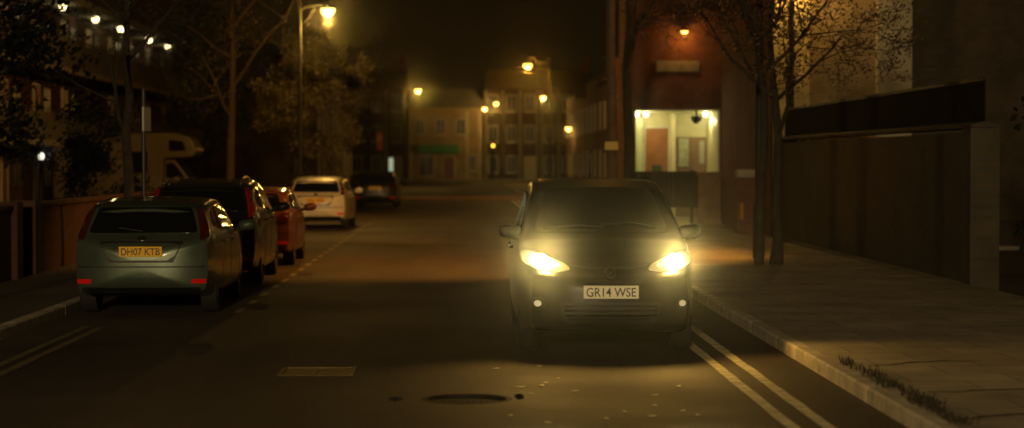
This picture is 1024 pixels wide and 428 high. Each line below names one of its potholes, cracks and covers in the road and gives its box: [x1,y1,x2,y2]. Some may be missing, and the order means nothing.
manhole cover [276,367,357,376]
manhole cover [421,394,512,404]
